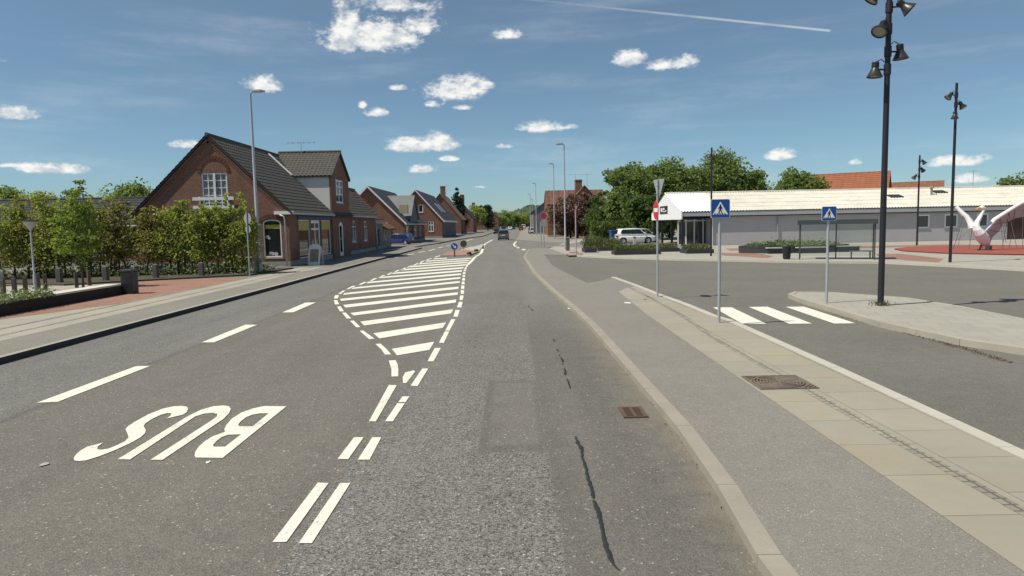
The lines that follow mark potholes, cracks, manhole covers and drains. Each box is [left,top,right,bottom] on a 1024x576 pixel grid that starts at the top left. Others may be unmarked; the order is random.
drain grate [618,406,648,418]
